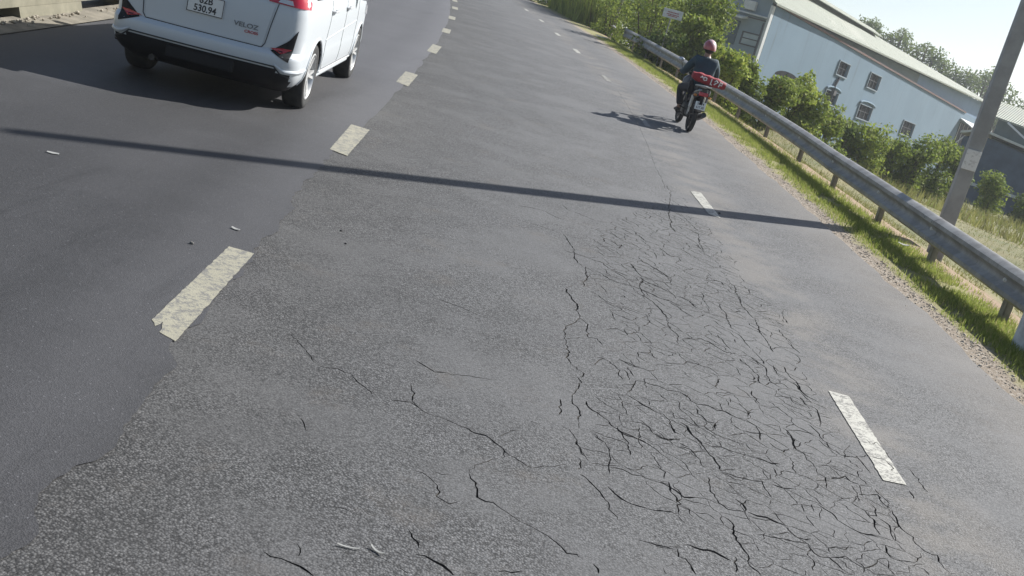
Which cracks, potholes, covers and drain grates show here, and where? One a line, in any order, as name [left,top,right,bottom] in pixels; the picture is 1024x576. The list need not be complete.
crack [376,531,476,575]
crack [394,192,953,576]
crack [291,335,372,394]
